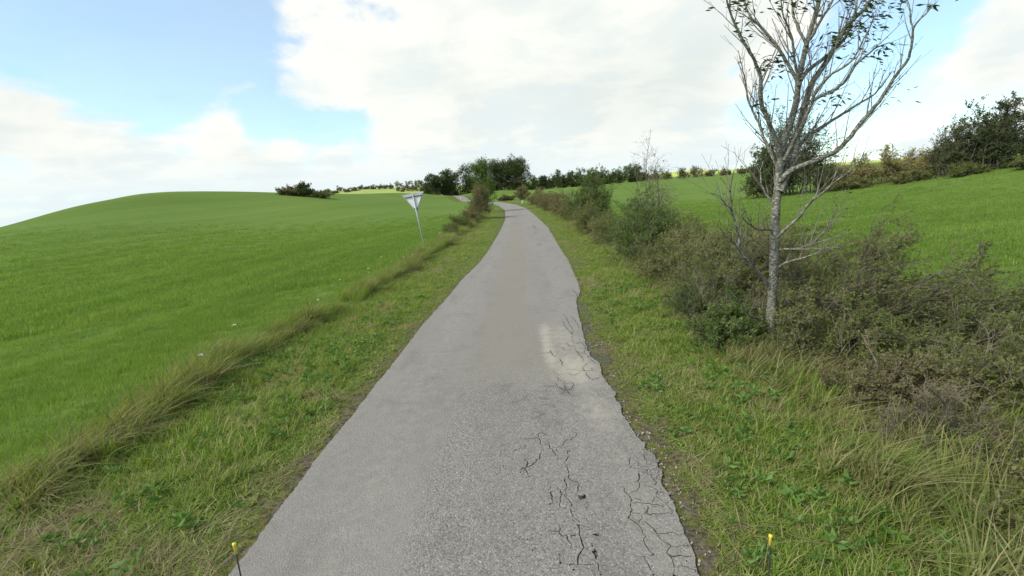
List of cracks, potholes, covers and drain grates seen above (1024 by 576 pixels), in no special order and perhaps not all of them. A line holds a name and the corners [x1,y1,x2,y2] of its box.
crack [499,314,695,576]
